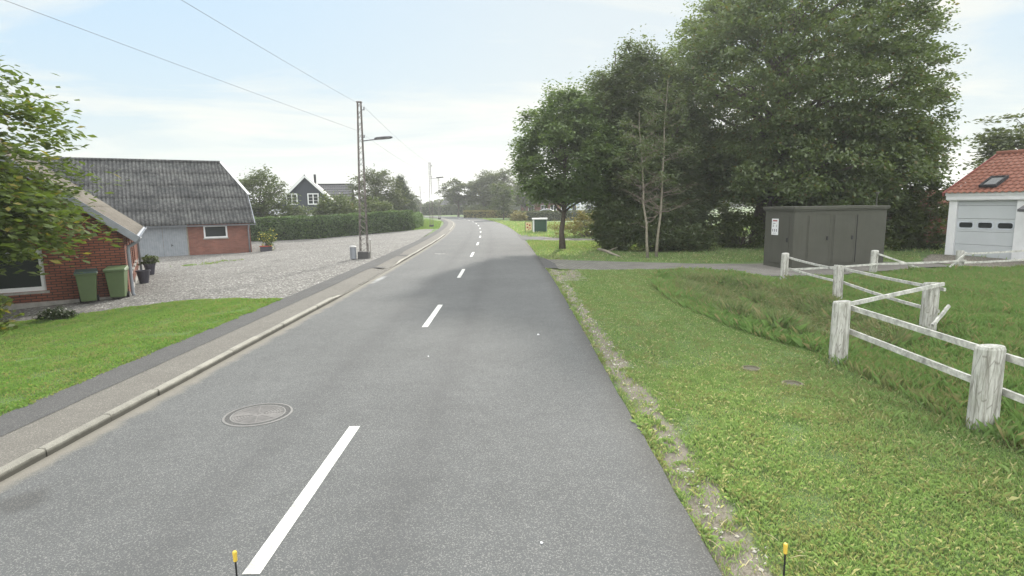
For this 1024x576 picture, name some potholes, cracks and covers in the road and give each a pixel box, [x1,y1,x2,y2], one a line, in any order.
manhole cover [222,403,293,427]
